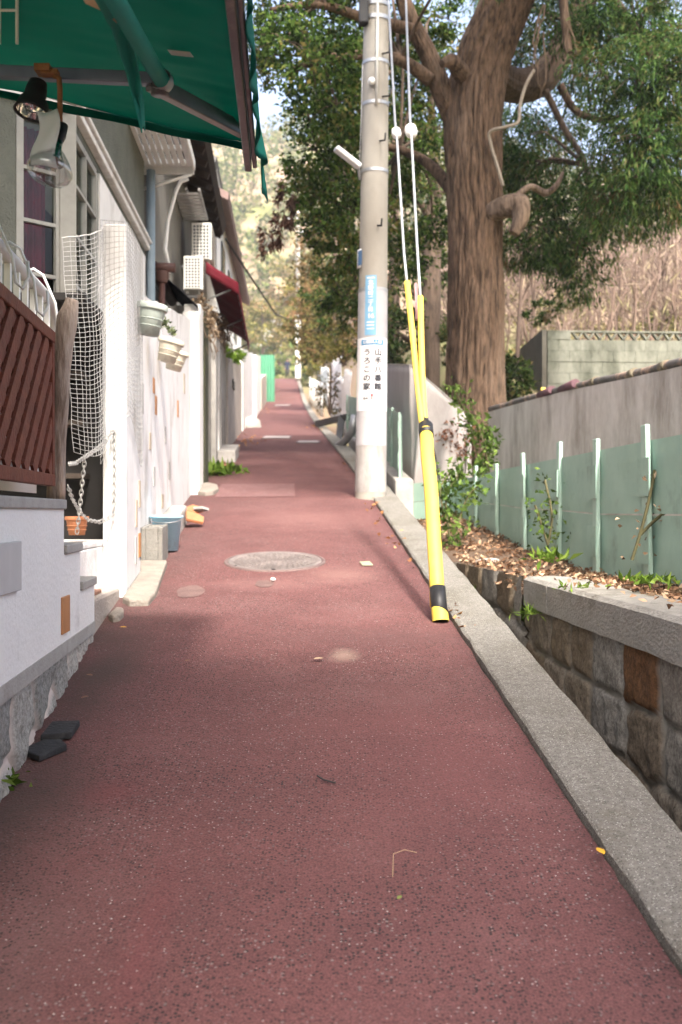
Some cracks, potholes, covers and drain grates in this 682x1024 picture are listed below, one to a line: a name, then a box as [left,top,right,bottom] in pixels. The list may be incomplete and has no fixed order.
manhole cover [224,551,326,572]
